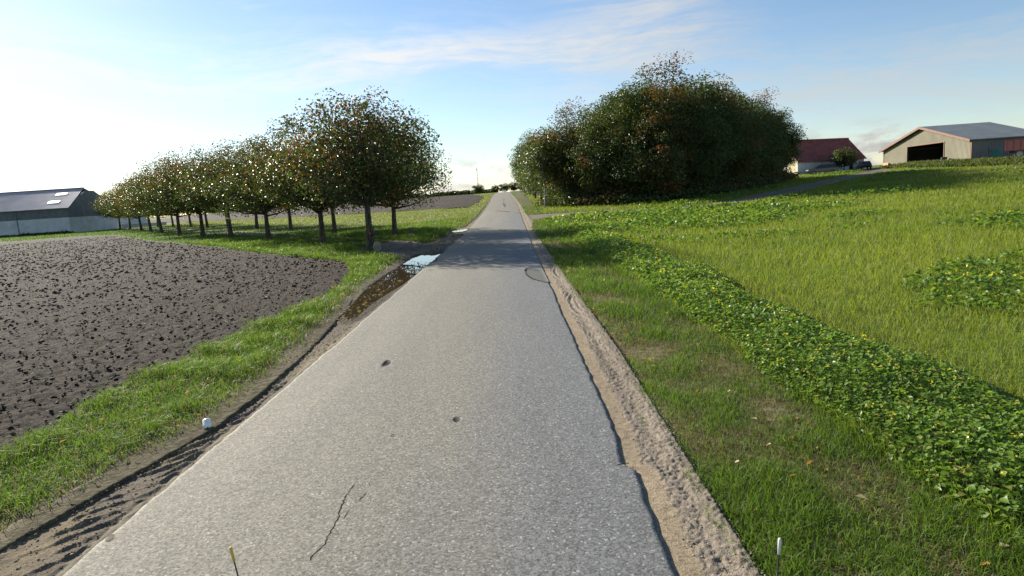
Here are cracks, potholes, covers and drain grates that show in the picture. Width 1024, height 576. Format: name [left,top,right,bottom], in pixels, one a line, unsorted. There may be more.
crack [310,481,371,560]
